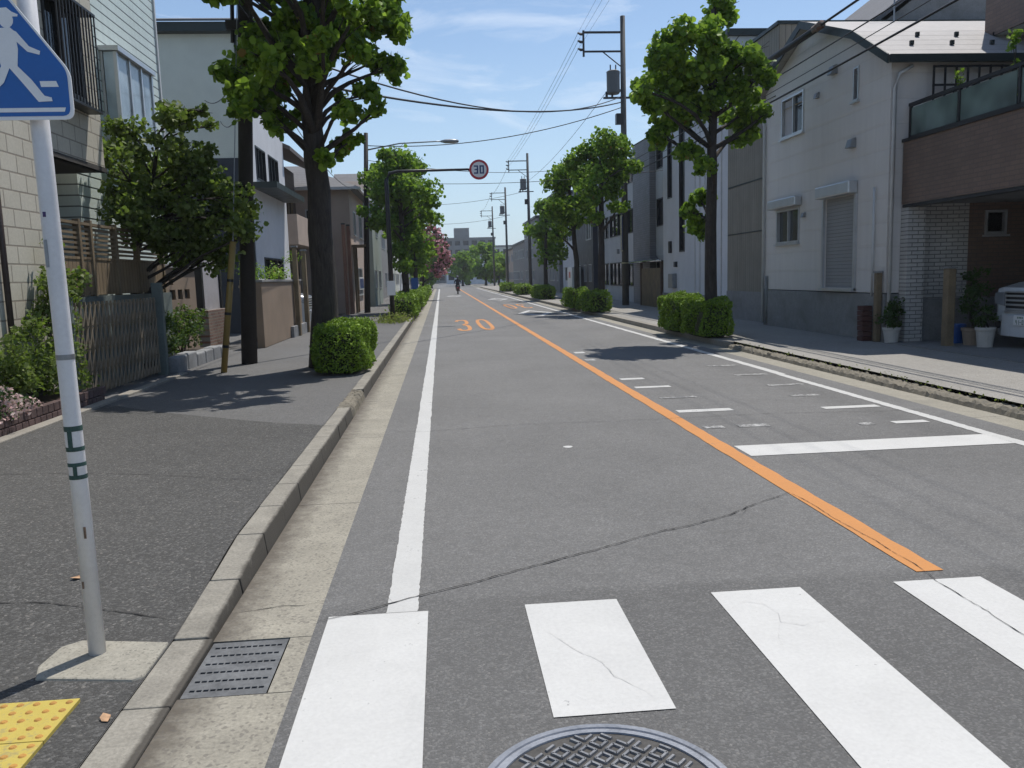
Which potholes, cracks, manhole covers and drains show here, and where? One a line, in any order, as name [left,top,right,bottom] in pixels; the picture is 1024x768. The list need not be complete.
drain grate [180,639,289,699]
crack [794,494,1021,633]
manhole cover [488,724,727,768]
crack [315,495,781,622]
crack [0,602,169,619]
